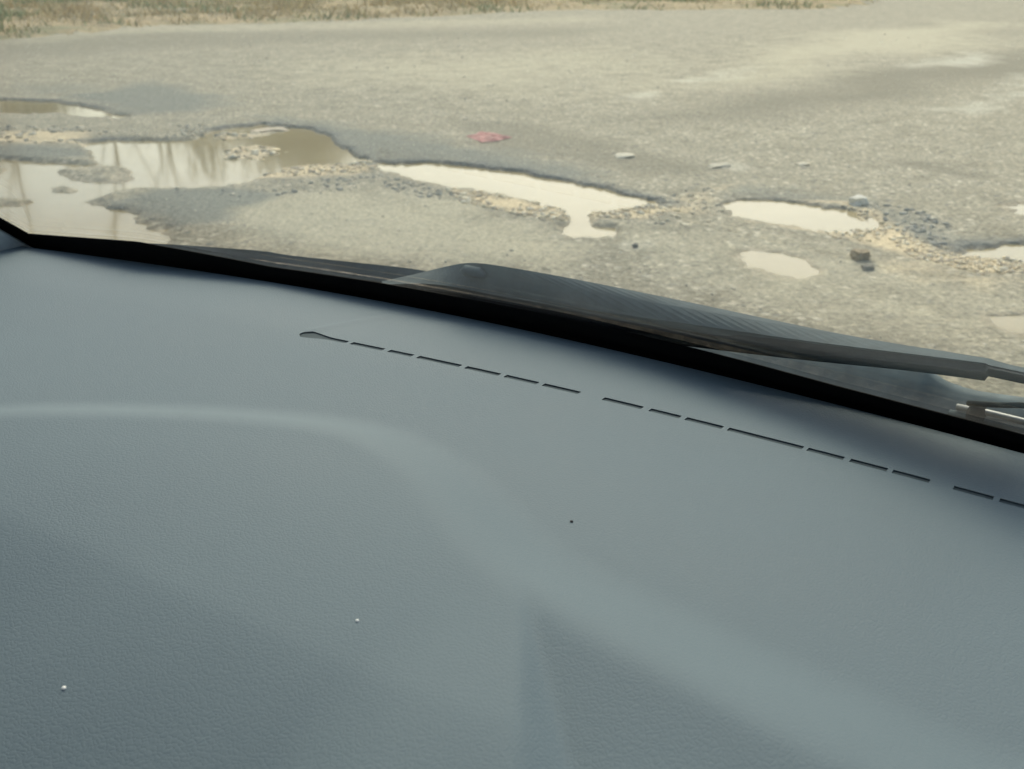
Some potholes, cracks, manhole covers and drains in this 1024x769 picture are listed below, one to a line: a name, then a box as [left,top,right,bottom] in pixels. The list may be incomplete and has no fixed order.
pothole [0,122,374,245]
pothole [366,160,675,241]
pothole [714,197,892,236]
pothole [920,239,1024,263]
pothole [722,243,832,282]
pothole [0,98,138,119]
pothole [975,308,1024,339]
